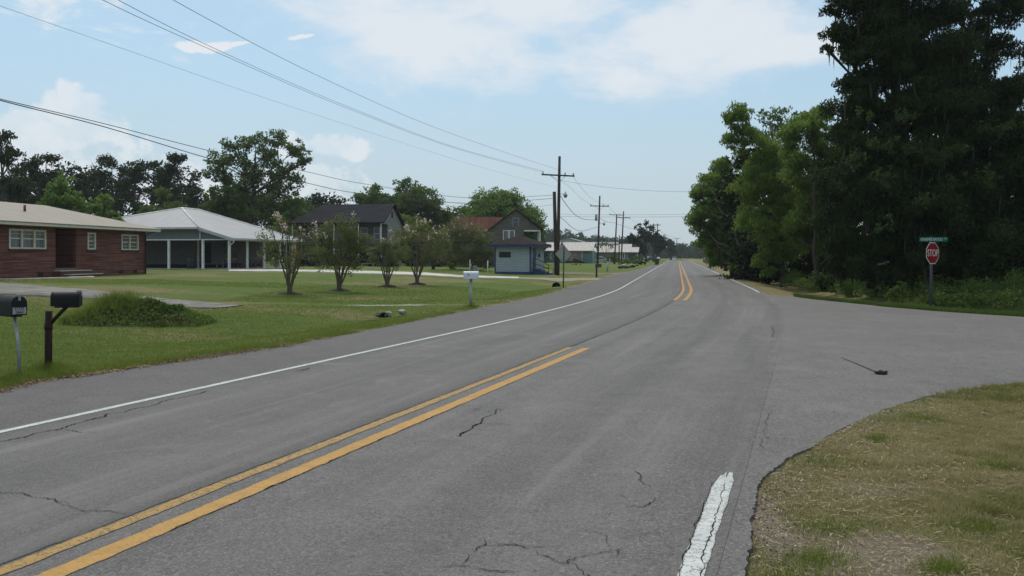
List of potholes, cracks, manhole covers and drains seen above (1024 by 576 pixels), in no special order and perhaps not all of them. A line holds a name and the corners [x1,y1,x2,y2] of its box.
crack [0,492,134,513]
crack [450,528,648,576]
crack [4,391,205,441]
